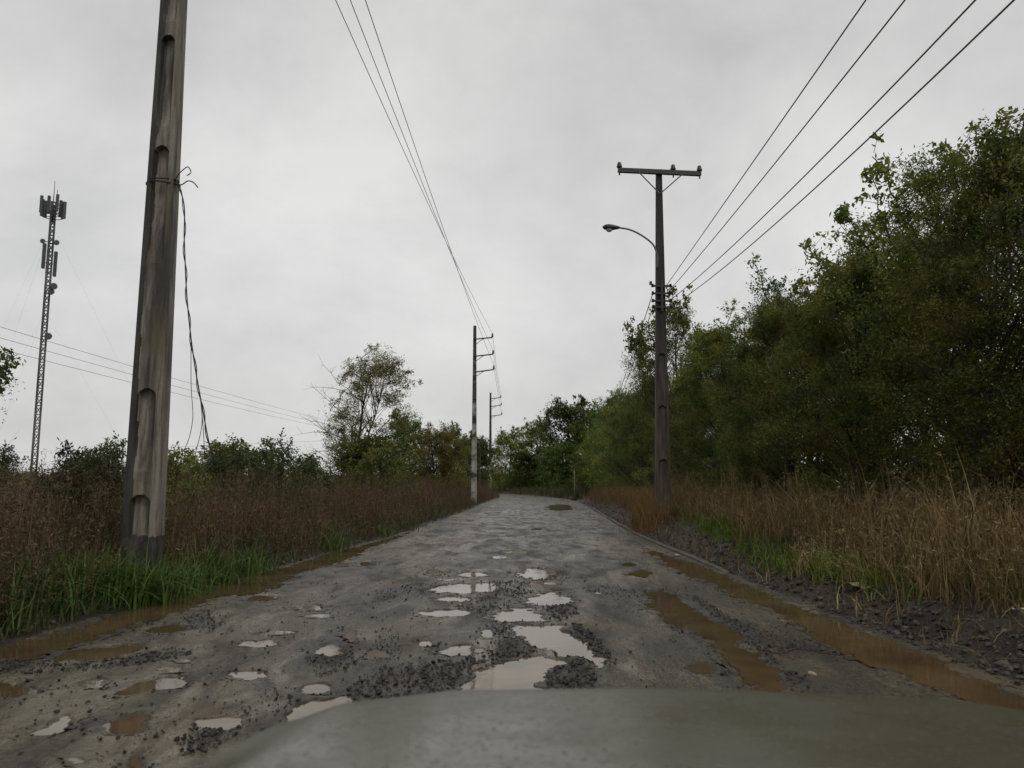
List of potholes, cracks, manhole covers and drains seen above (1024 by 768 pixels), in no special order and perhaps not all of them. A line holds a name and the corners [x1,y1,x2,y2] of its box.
pothole [440,649,588,692]
pothole [422,581,506,595]
pothole [264,692,367,728]
pothole [476,604,557,623]
pothole [65,705,172,736]
pothole [216,664,276,682]
pothole [0,678,57,702]
pothole [424,642,492,657]
pothole [230,638,291,649]
pothole [303,637,357,659]
pothole [90,673,203,699]
